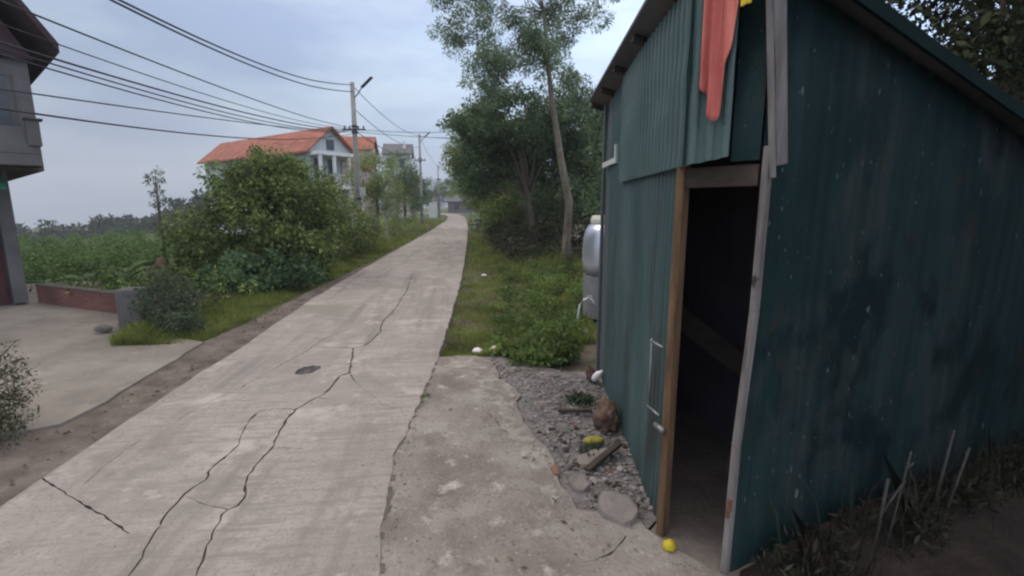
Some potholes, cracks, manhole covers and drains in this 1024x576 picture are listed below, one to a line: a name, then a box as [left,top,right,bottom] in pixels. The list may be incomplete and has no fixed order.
pothole [295,365,321,375]
crack [42,275,412,576]
